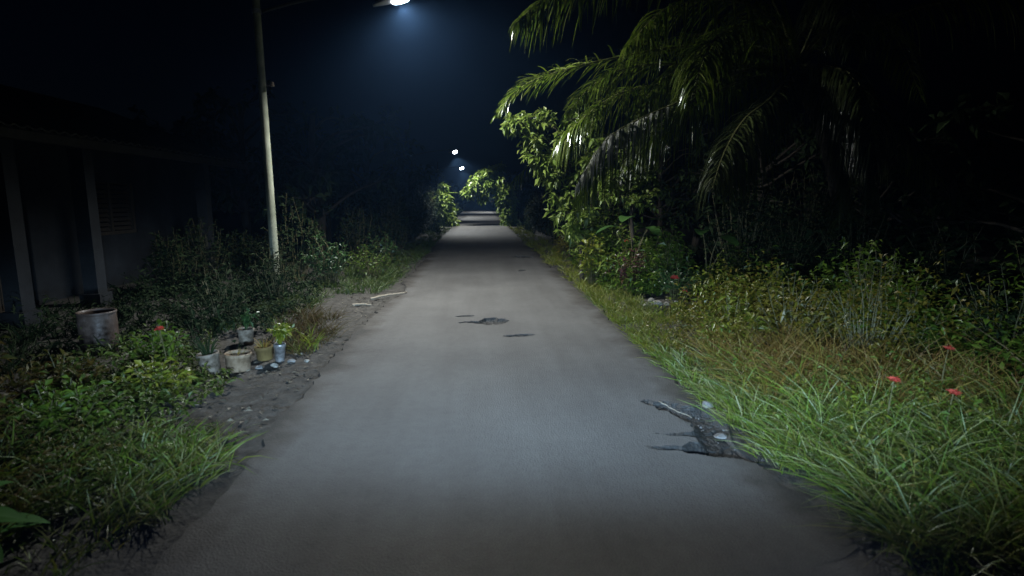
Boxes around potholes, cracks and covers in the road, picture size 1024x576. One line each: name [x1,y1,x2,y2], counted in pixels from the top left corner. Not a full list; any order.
pothole [640,399,765,464]
